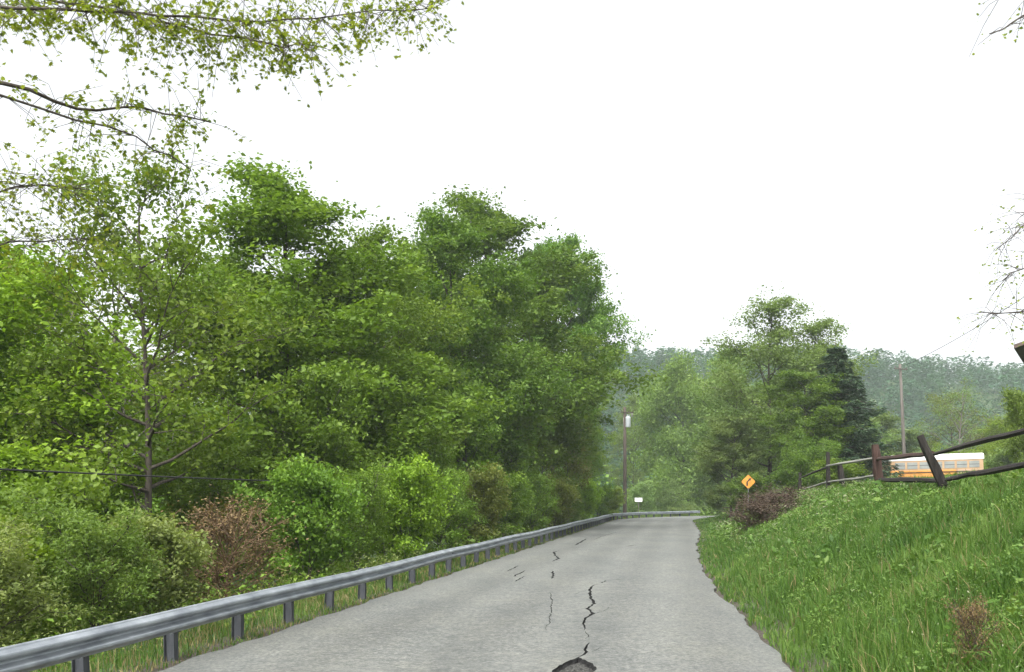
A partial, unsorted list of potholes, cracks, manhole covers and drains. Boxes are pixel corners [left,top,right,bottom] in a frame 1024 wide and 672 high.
pothole [552,657,597,672]
crack [579,579,620,657]
crack [546,532,632,626]
